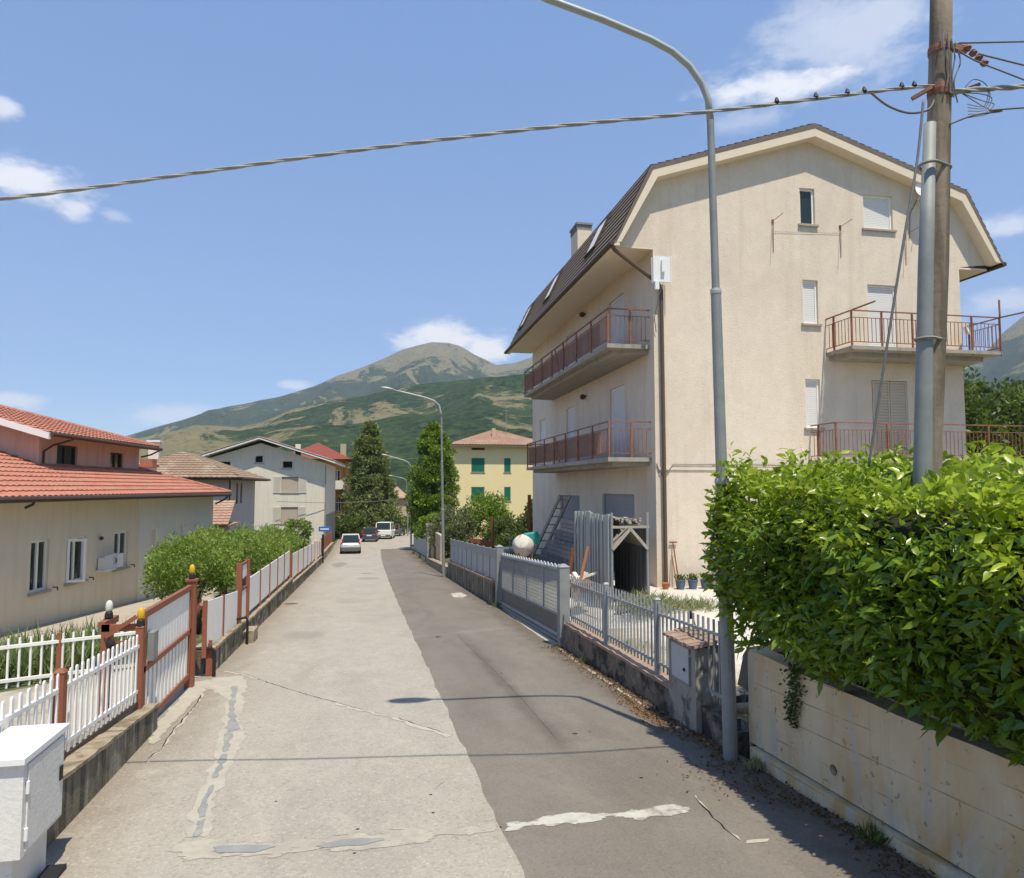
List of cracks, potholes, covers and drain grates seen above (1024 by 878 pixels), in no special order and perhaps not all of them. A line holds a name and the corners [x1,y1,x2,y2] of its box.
crack [694,796,740,841]
crack [224,671,452,737]
crack [146,693,204,763]
